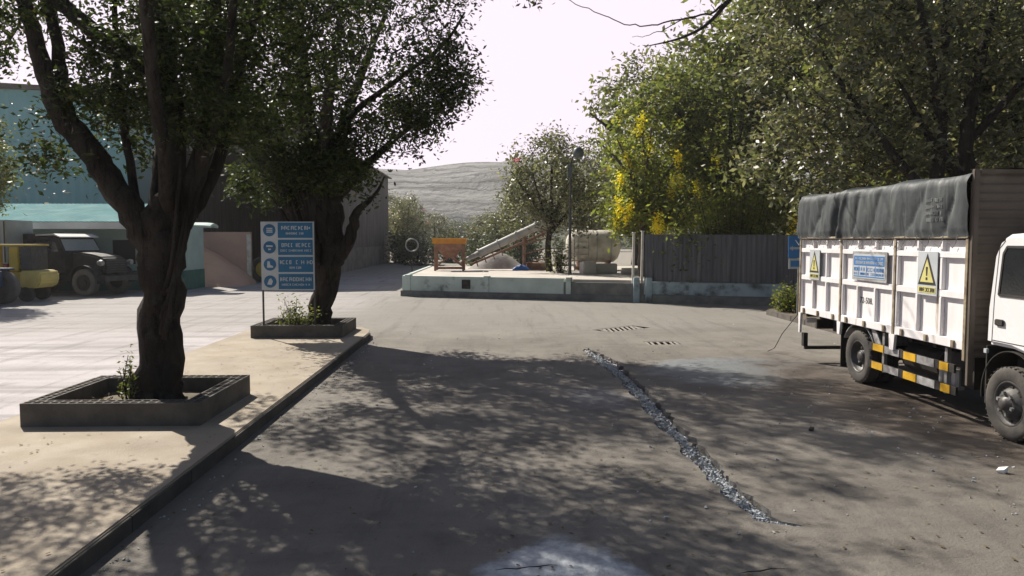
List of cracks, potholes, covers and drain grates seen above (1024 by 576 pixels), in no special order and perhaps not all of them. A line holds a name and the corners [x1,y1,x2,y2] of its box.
crack [583,348,802,527]
